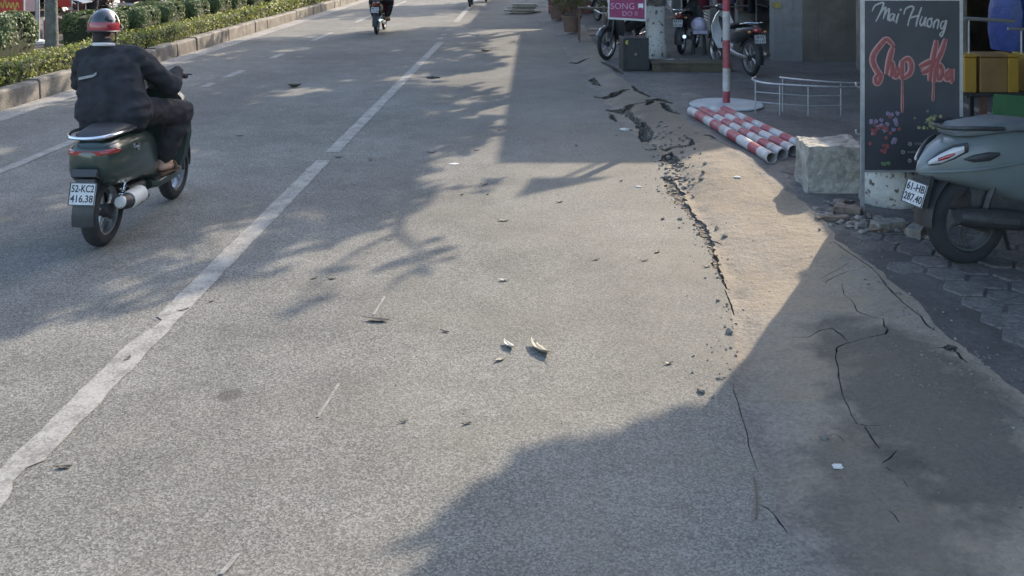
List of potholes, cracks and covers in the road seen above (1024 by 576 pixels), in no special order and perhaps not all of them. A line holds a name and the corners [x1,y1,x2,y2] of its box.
crack [733,383,759,472]
crack [809,263,908,488]
crack [660,177,735,316]
